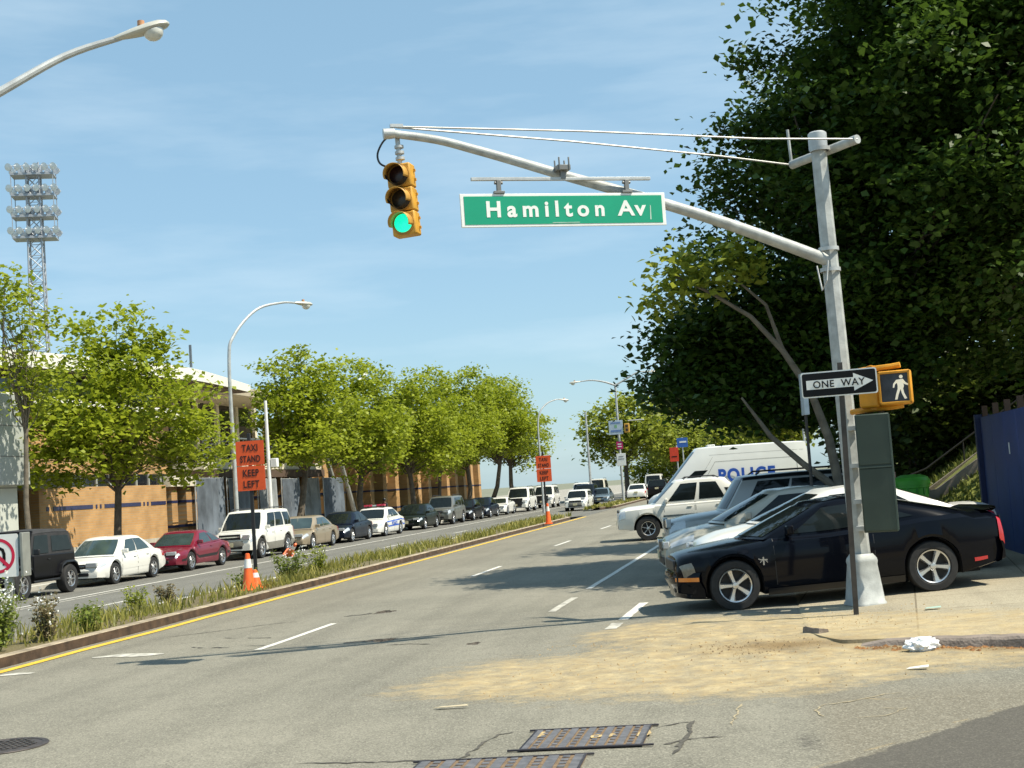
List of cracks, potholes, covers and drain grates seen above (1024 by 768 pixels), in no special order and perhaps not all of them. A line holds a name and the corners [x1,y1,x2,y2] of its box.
drain grate [507,723,659,752]
drain grate [413,752,595,768]
manhole cover [0,737,49,754]
crack [309,732,512,763]
crack [660,704,742,754]
crack [814,692,906,718]
